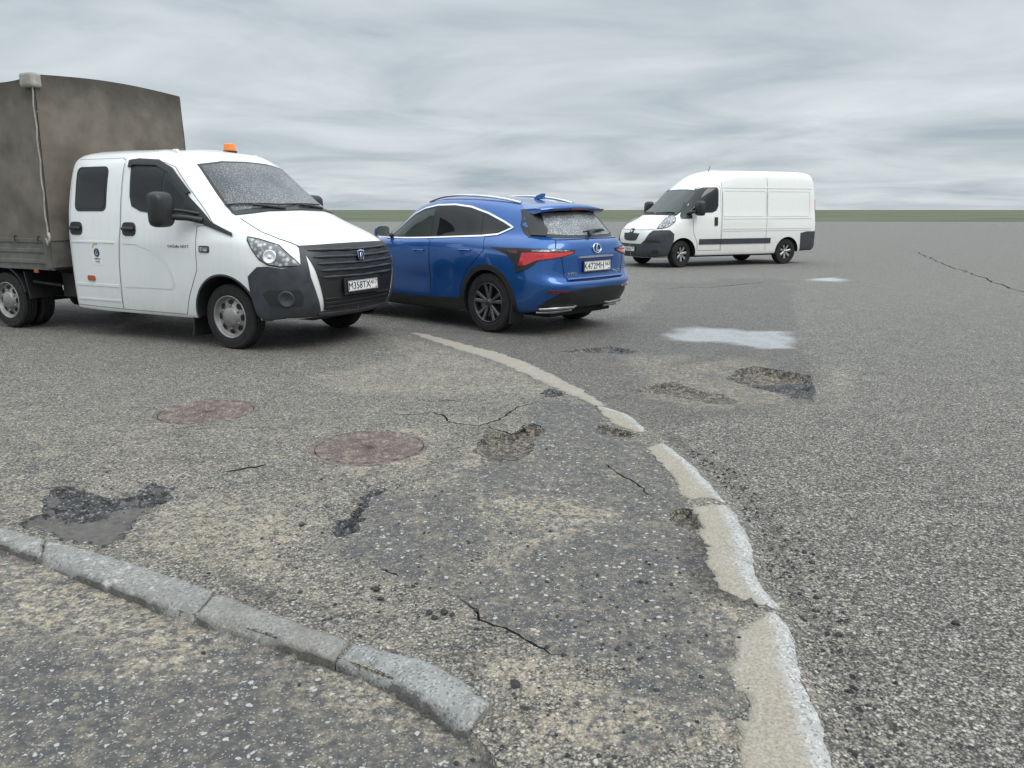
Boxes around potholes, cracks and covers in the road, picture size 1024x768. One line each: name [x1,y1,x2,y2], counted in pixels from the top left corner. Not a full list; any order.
crack [227,464,267,472]
manhole cover [308,431,429,466]
manhole cover [152,399,259,425]
pothole [726,366,816,402]
pothole [560,346,638,354]
crack [606,464,655,499]
crack [918,252,1024,292]
pothole [473,425,545,463]
pothole [668,508,698,530]
crack [363,400,544,435]
pothole [597,425,635,438]
crack [457,596,567,656]
